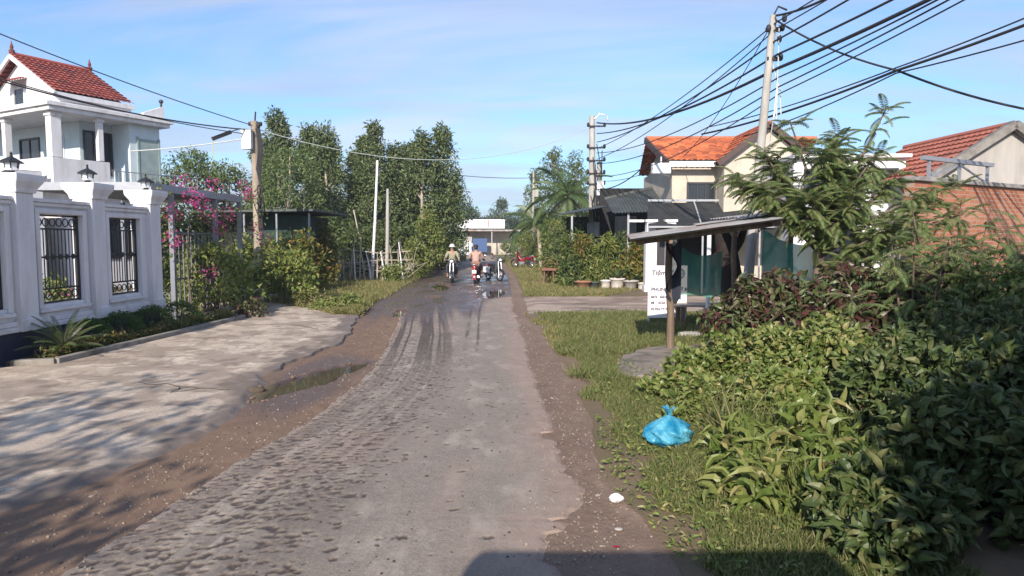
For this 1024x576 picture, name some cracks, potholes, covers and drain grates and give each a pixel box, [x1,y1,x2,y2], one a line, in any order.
pothole [429,281,452,291]
crack [140,382,230,392]
pothole [476,287,510,300]
pothole [247,359,379,400]
